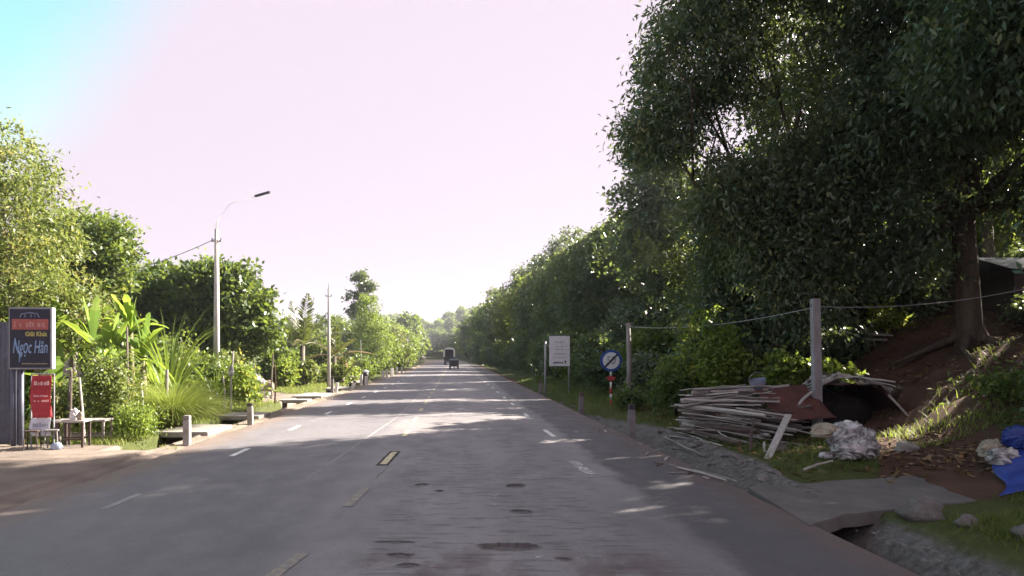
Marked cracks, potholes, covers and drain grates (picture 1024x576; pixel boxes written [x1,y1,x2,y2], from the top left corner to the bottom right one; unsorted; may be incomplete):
pothole [475,542,543,551]
